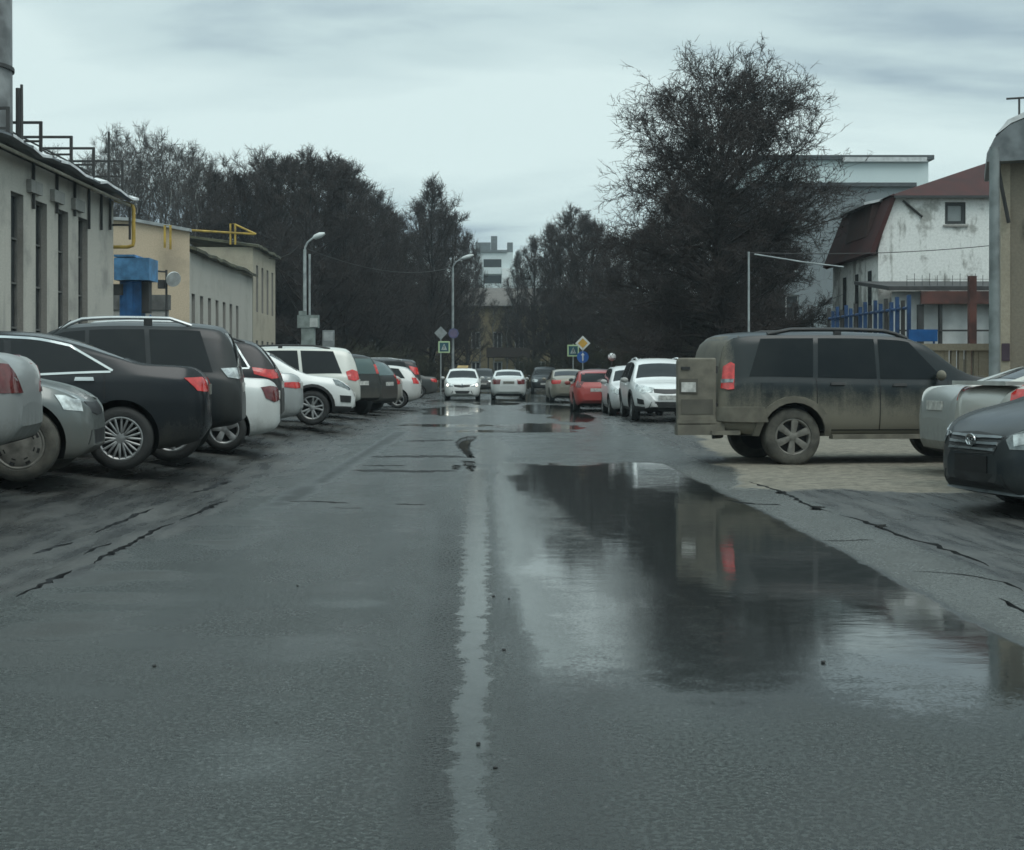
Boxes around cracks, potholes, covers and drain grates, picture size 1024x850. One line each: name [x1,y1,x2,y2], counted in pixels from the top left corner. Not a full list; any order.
pothole [454,436,476,458]
crack [16,481,231,597]
crack [728,482,1024,613]
